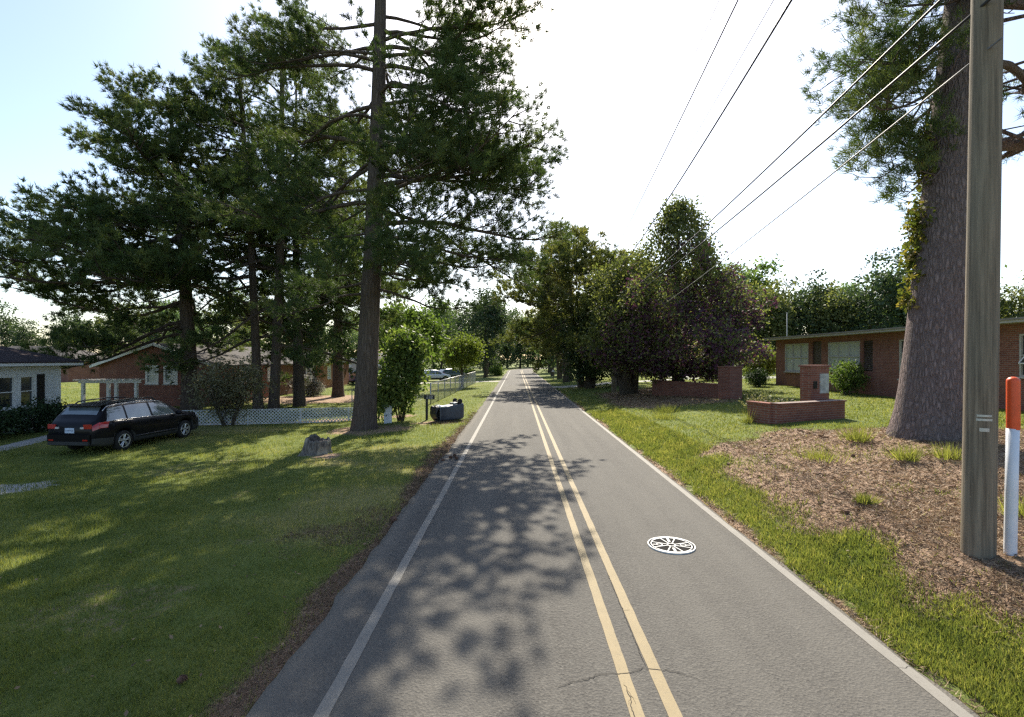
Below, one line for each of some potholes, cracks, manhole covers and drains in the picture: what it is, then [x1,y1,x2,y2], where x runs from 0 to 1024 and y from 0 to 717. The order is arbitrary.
manhole cover [648,536,696,555]
crack [555,582,702,717]
